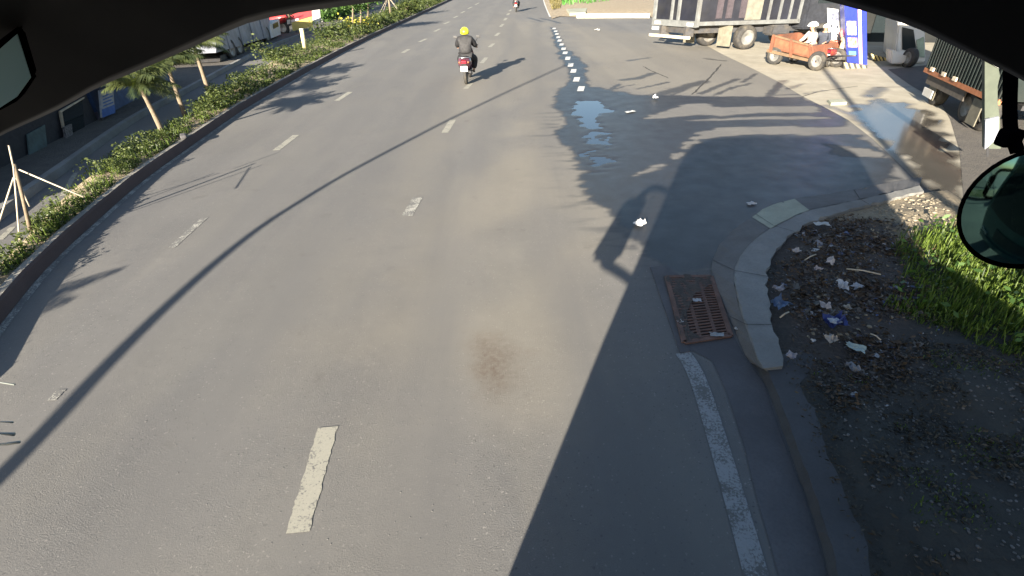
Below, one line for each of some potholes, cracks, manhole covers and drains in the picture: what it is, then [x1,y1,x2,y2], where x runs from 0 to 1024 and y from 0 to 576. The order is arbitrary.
drain grate [664,275,733,345]
